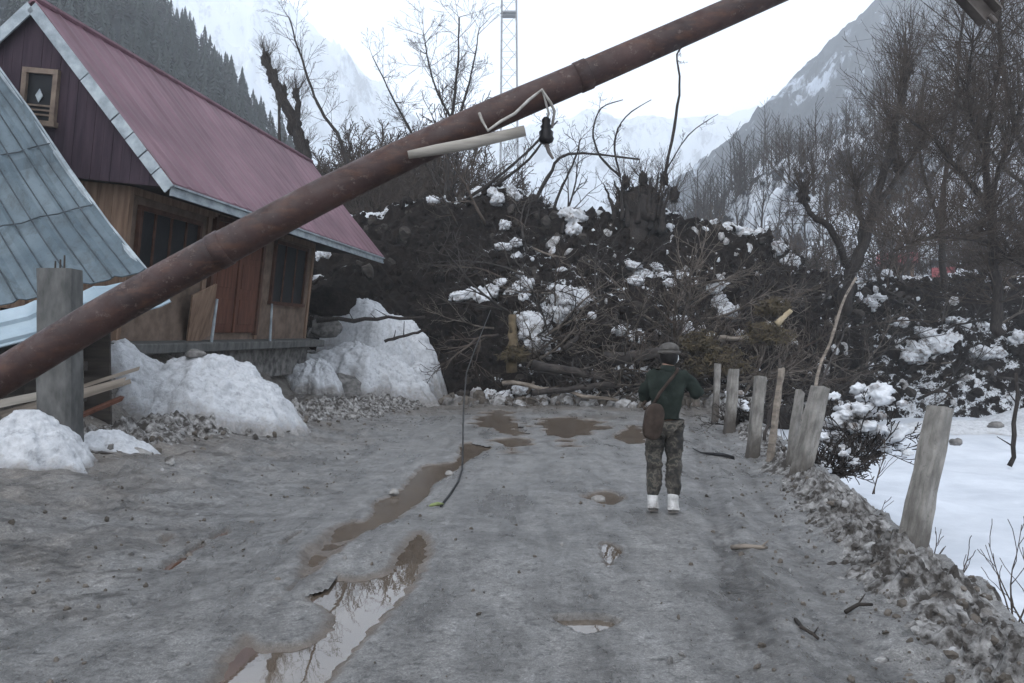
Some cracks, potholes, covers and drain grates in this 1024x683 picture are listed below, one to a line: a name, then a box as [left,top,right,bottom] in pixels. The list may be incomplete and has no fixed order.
pothole [567,488,637,507]
pothole [591,539,631,570]
pothole [541,610,630,636]
pothole [456,408,547,455]
pothole [602,423,646,445]
pothole [518,414,625,449]
